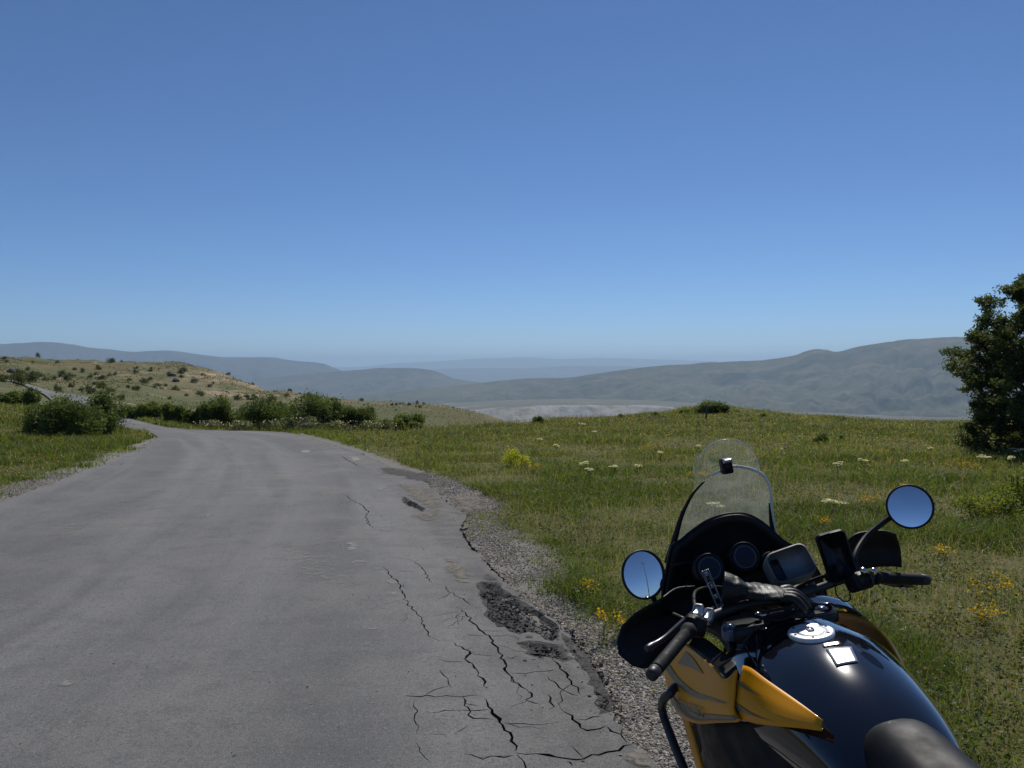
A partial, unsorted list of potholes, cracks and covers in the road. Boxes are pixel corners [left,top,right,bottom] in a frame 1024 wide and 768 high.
crack [386,558,628,768]
crack [460,524,508,583]
pothole [401,496,426,512]
pothole [476,581,560,641]
pothole [517,641,575,663]
